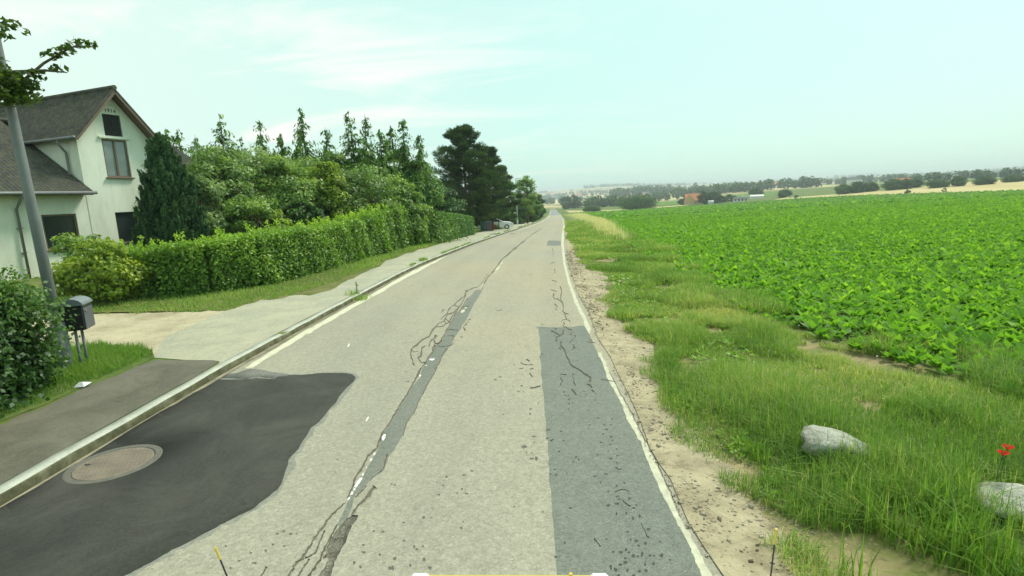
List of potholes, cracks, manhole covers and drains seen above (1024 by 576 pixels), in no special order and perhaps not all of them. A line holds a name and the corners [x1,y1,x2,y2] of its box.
crack [287,274,488,576]
manhole cover [62,444,163,484]
crack [551,249,679,511]
